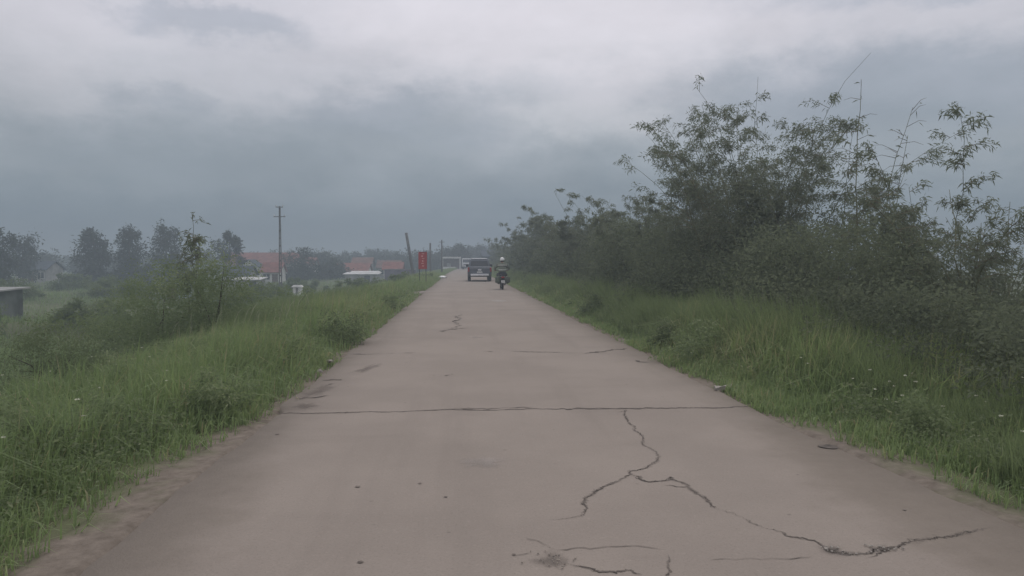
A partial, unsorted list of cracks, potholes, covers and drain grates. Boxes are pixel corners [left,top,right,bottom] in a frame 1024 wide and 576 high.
crack [557,410,762,526]
crack [710,530,968,560]
crack [520,538,672,576]
